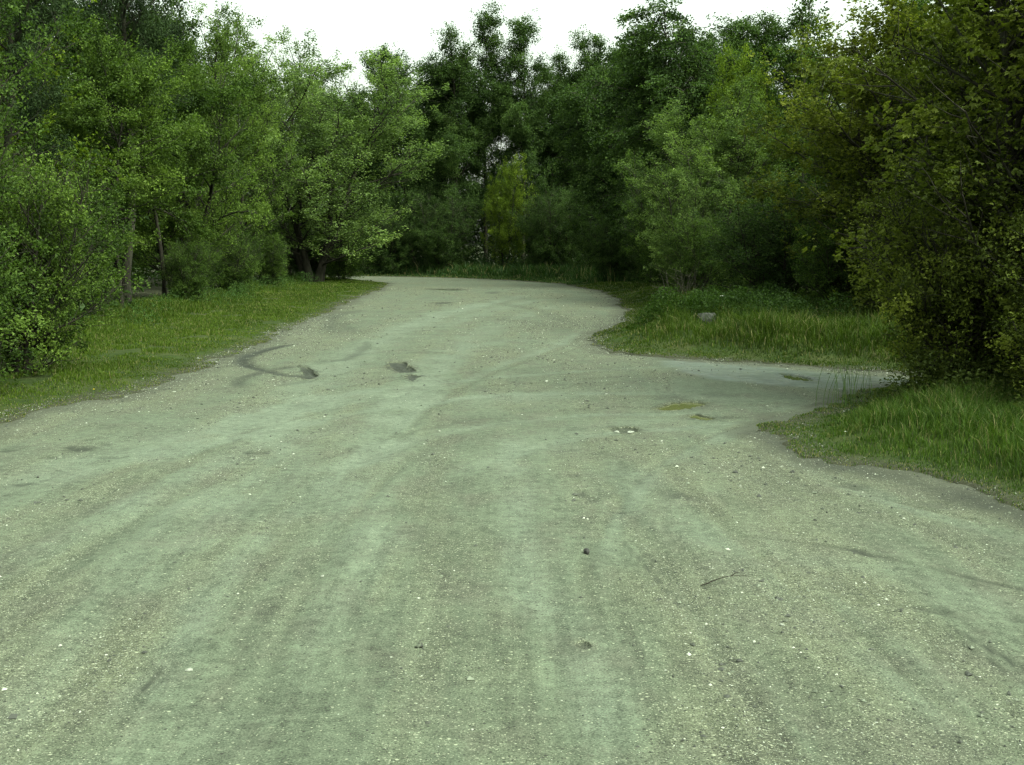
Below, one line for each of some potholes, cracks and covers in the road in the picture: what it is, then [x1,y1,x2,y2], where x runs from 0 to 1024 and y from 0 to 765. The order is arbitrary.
pothole [596,425,650,436]
pothole [292,365,325,381]
pothole [396,374,430,383]
pothole [378,361,421,374]
